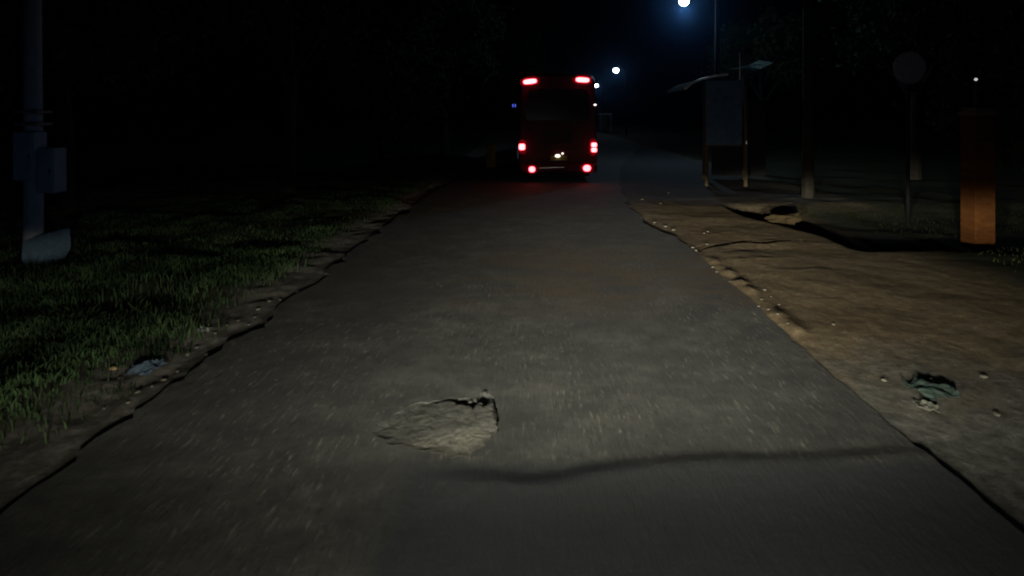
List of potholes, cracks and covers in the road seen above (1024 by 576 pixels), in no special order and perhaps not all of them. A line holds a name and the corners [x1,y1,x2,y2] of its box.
pothole [371,391,500,458]
crack [696,238,809,255]
